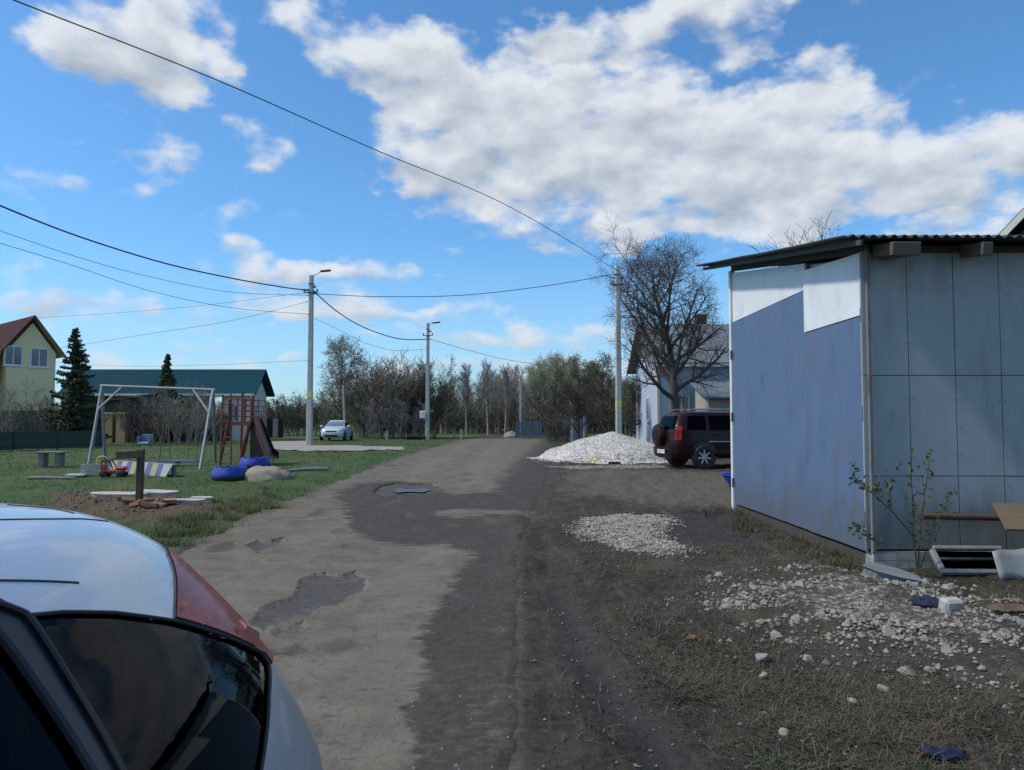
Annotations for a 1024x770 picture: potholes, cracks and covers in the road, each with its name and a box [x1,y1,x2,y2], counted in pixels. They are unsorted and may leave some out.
pothole [371,482,444,497]
pothole [202,540,244,554]
pothole [240,536,288,553]
pothole [245,569,375,632]
